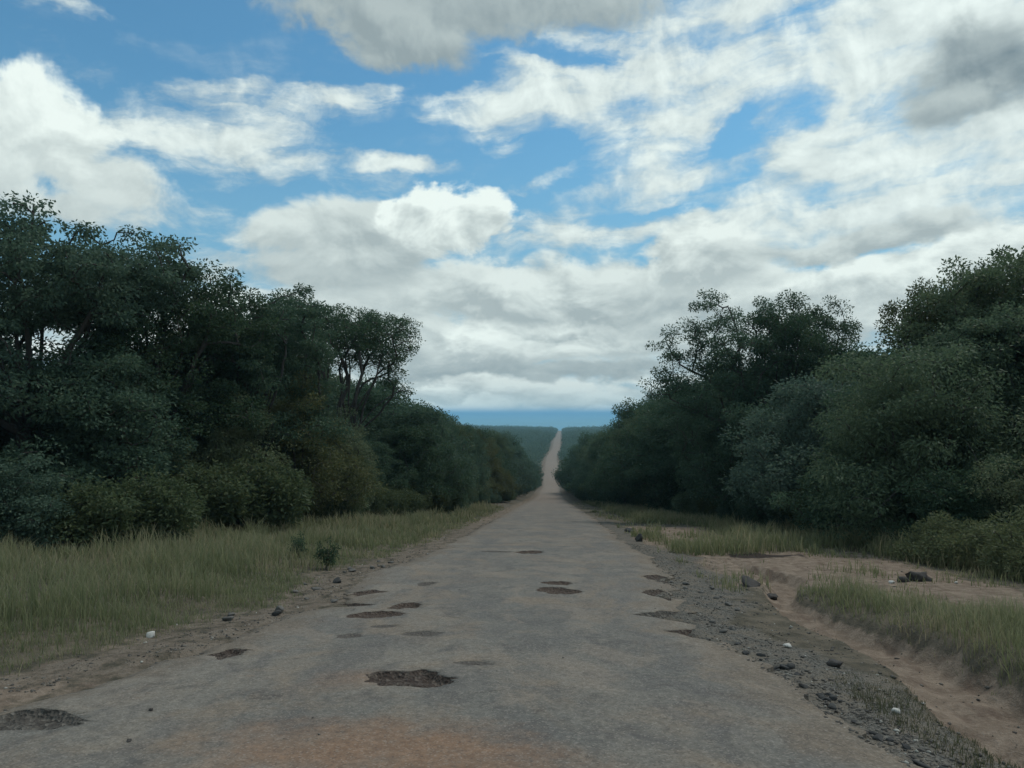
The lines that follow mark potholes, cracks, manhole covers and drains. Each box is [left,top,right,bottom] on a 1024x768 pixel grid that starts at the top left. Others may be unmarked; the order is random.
pothole [641,589,671,601]
pothole [364,669,458,688]
pothole [0,709,87,731]
pothole [209,648,247,660]
pothole [633,611,706,623]
